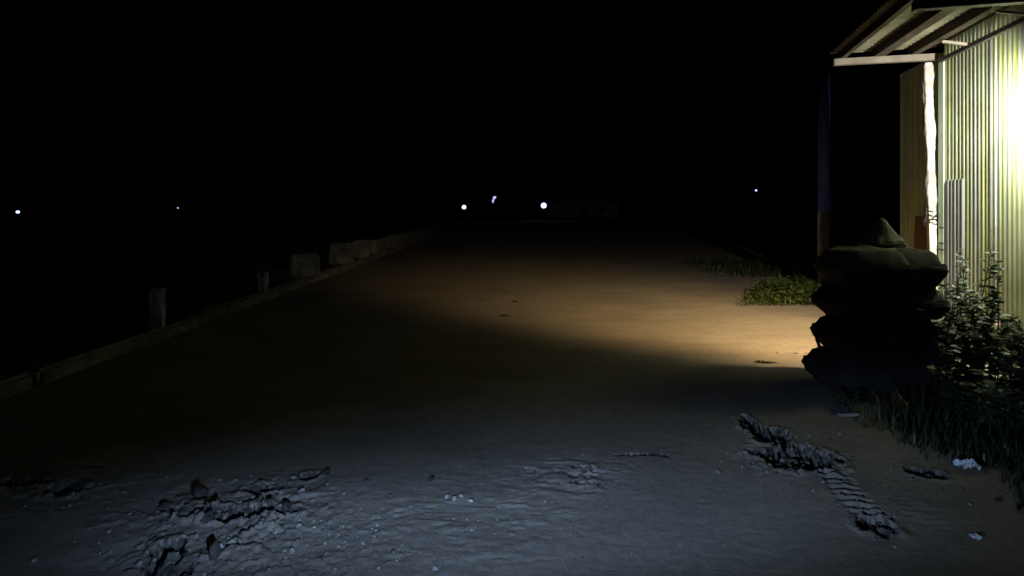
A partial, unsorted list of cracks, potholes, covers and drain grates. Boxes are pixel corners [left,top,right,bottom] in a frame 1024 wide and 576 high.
pothole [243,480,276,495]
pothole [854,517,901,538]
pothole [298,470,320,481]
pothole [904,466,950,480]
pothole [136,535,194,576]
pothole [195,499,302,524]
pothole [738,415,850,475]
pothole [523,464,607,479]
